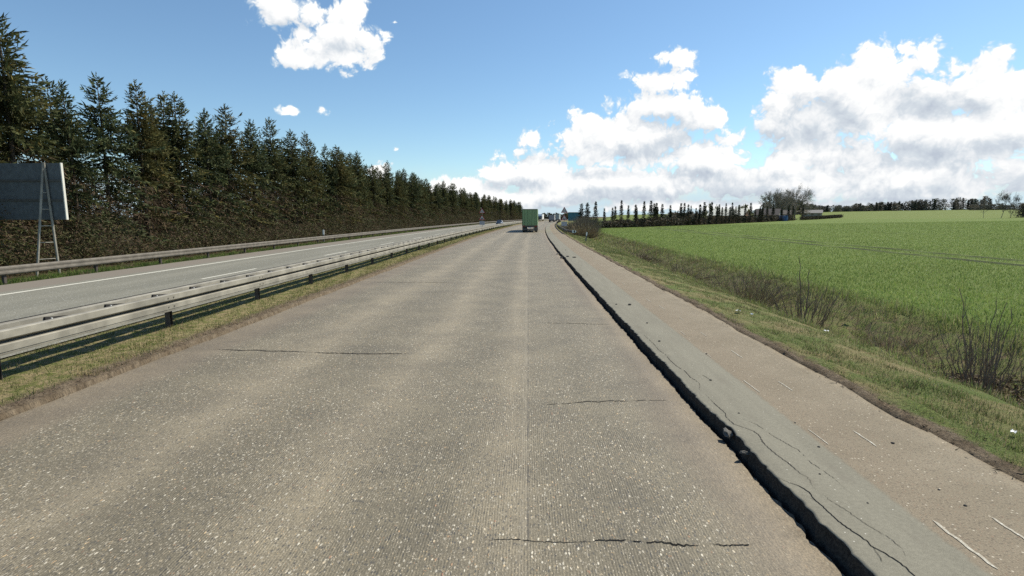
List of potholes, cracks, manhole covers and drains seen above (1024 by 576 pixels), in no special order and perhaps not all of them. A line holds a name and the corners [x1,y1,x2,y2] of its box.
crack [493,538,749,546]
crack [644,335,915,576]
